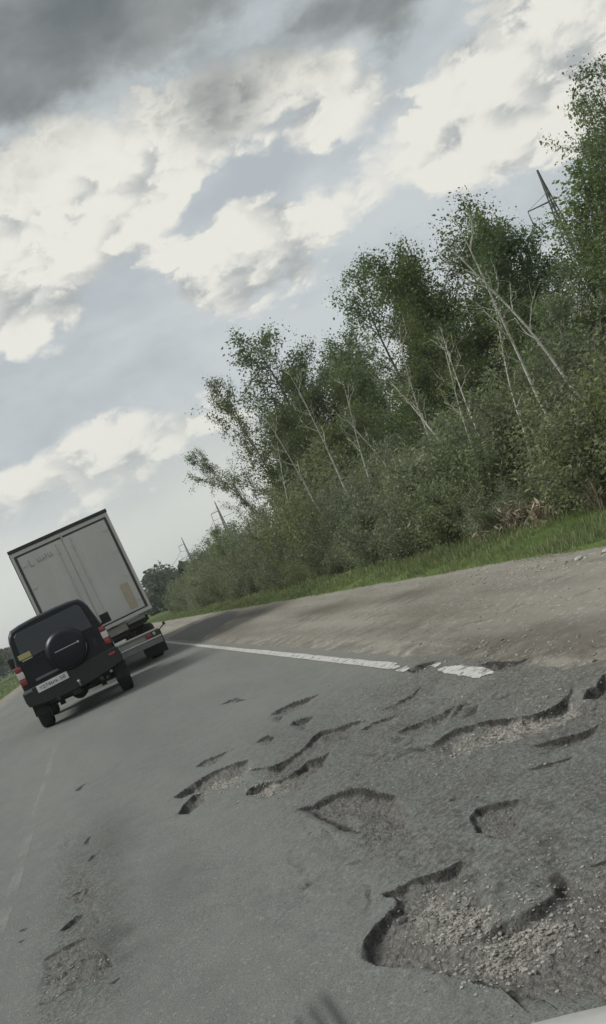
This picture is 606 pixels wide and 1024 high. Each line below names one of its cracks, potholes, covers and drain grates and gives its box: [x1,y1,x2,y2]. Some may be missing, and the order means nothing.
pothole [426,680,599,758]
pothole [59,914,85,934]
pothole [35,937,116,1007]
pothole [220,697,246,707]
pothole [171,759,253,800]
pothole [292,787,418,846]
pothole [469,799,529,842]
pothole [267,693,322,720]
pothole [177,791,209,815]
pothole [584,673,606,700]
pothole [359,857,606,1014]
pothole [245,749,334,799]
